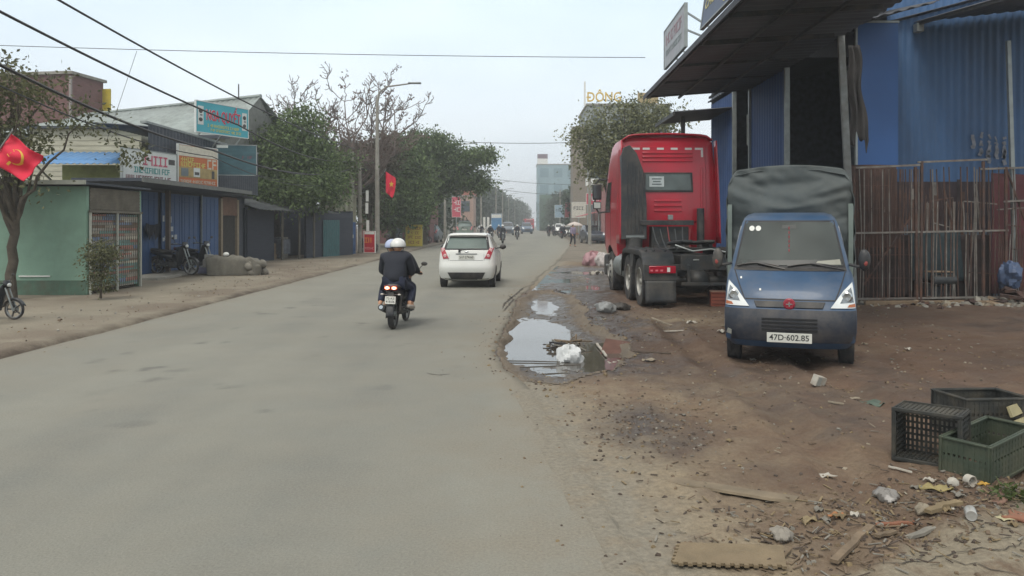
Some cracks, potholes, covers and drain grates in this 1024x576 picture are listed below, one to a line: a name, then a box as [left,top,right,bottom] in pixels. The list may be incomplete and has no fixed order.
pothole [497,289,640,385]
